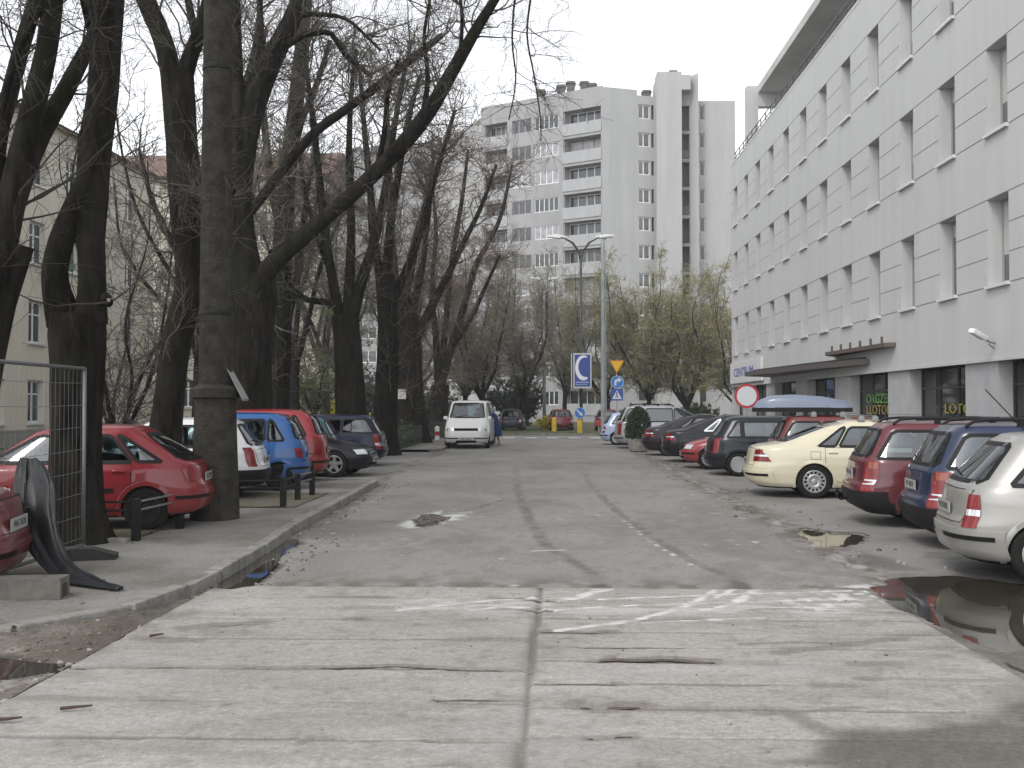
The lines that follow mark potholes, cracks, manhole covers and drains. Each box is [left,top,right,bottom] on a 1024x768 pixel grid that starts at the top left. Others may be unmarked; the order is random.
pothole [795,528,869,547]
pothole [412,514,451,527]
